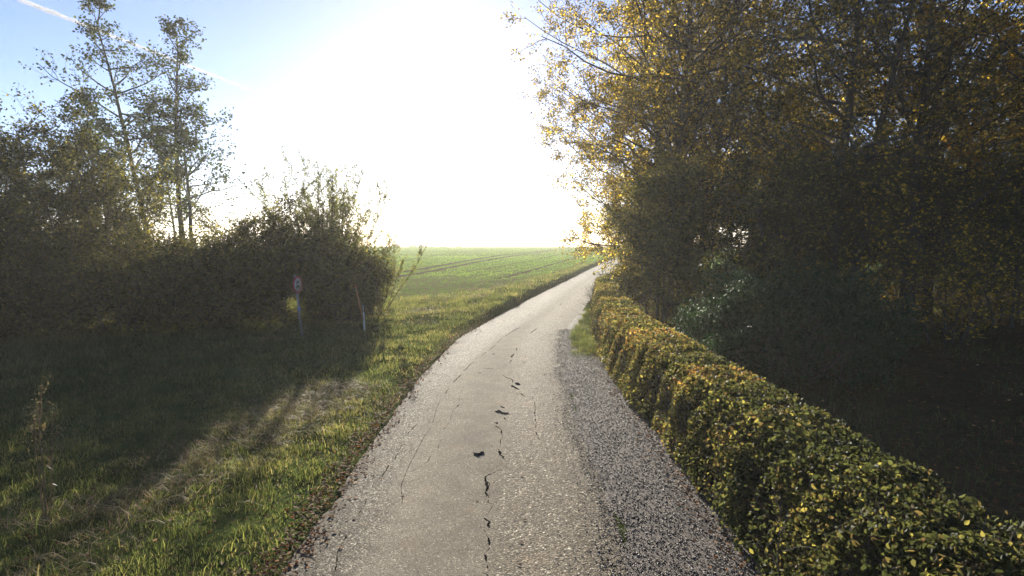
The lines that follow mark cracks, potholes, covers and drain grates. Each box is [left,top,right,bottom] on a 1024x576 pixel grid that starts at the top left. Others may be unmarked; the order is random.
crack [333,327,539,575]
